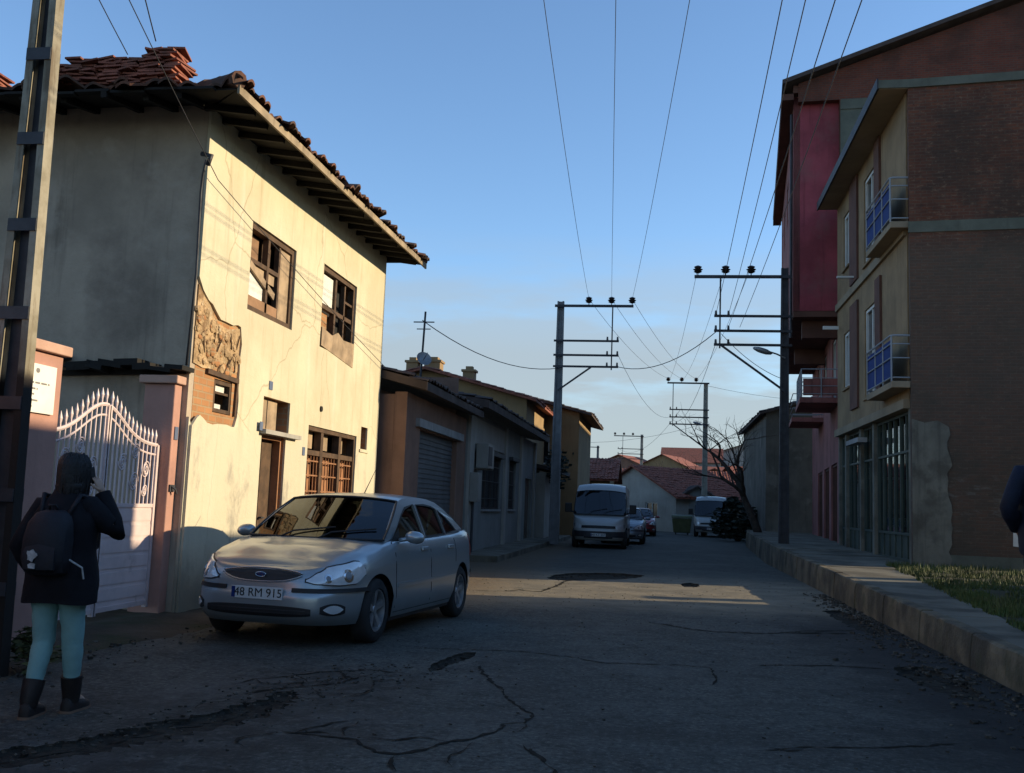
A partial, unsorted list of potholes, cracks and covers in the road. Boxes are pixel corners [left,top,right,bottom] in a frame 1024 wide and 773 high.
pothole [548,573,644,581]
pothole [428,652,476,671]
crack [650,622,853,634]
crack [234,648,717,773]
crack [756,743,958,751]
